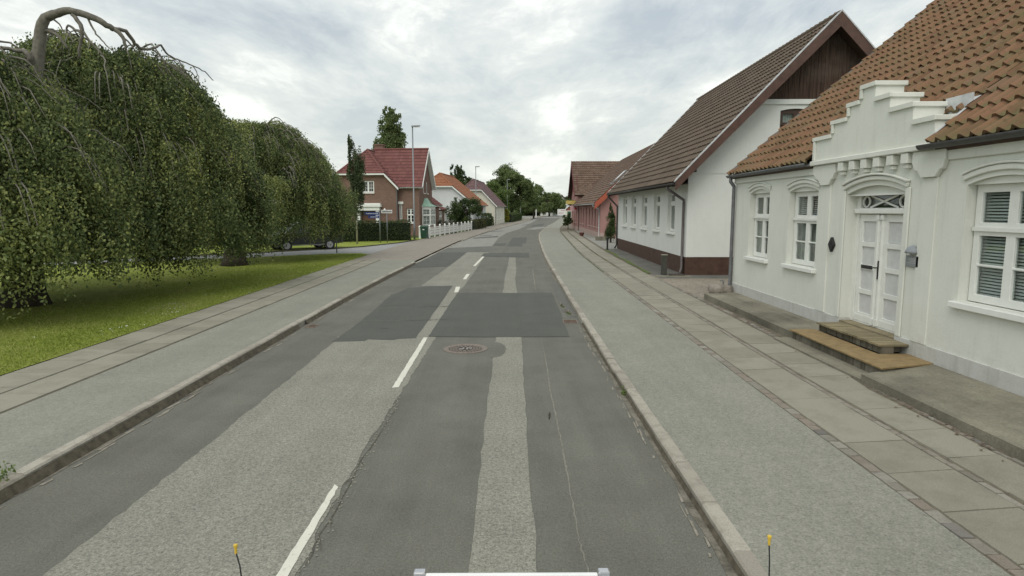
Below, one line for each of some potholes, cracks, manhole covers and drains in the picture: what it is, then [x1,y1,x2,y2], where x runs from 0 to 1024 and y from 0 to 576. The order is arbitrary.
manhole cover [443,344,488,354]
